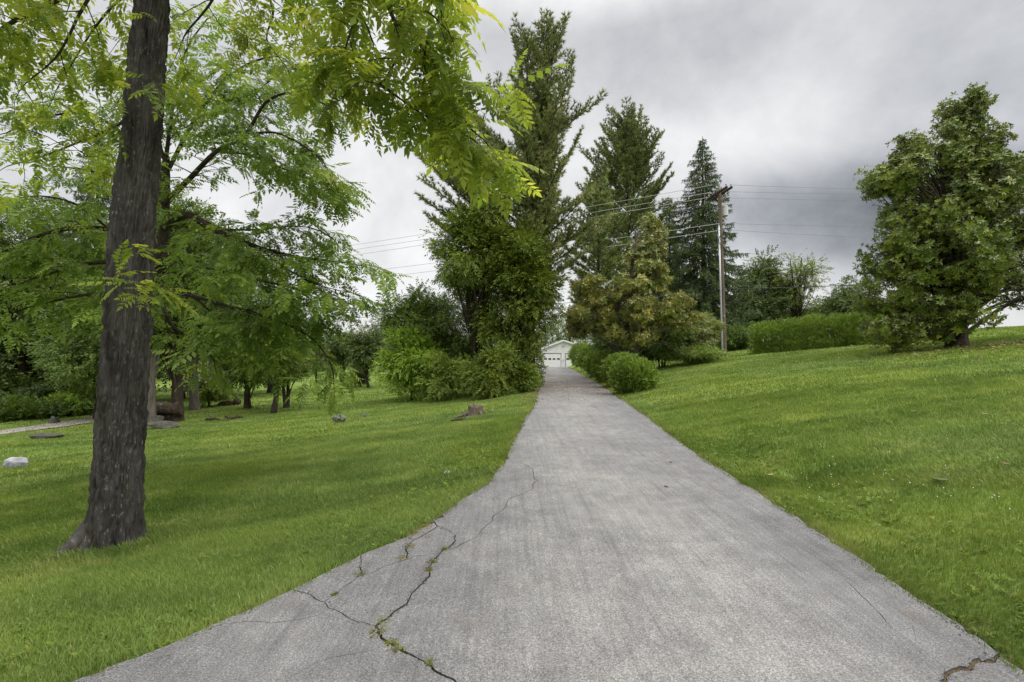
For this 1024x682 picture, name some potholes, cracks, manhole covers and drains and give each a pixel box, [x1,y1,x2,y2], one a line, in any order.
crack [218,461,538,682]
crack [912,626,1000,682]
